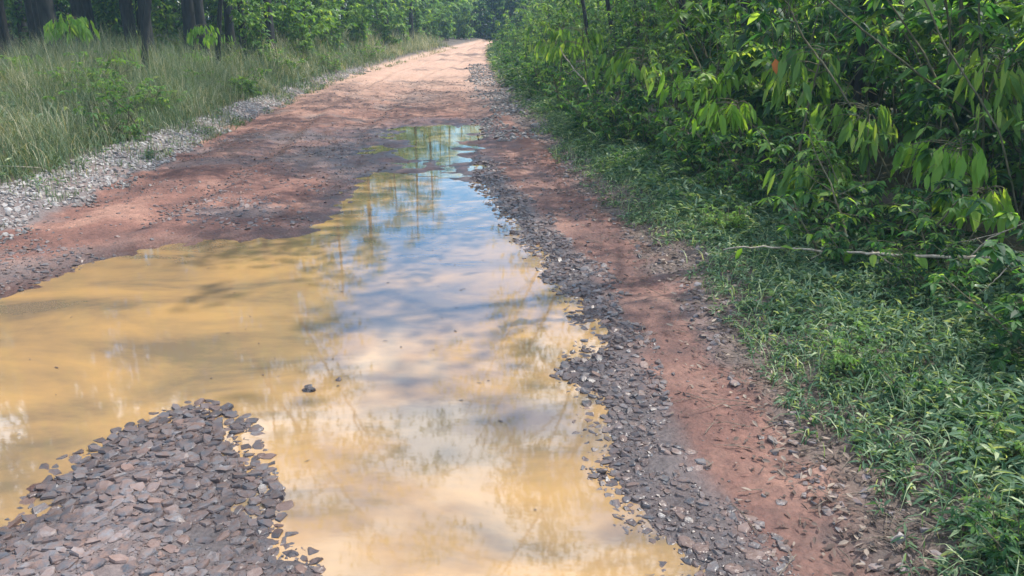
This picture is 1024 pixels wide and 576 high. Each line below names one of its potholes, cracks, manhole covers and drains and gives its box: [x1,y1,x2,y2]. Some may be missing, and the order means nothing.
pothole [357,118,494,178]
pothole [0,164,711,576]
